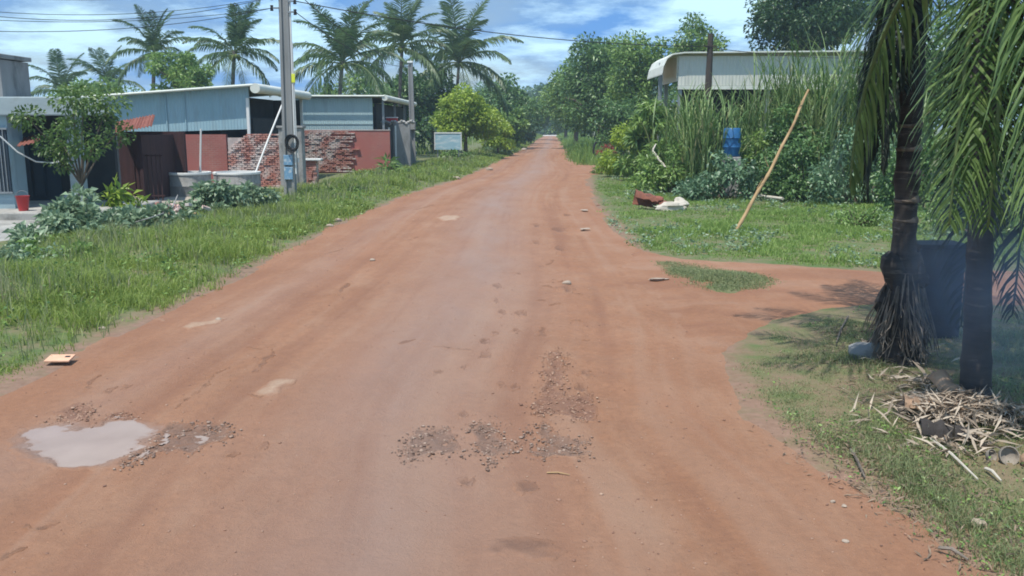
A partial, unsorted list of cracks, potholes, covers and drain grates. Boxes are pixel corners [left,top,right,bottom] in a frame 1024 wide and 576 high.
pothole [101,417,242,471]
pothole [3,416,171,472]
pothole [572,382,588,394]
